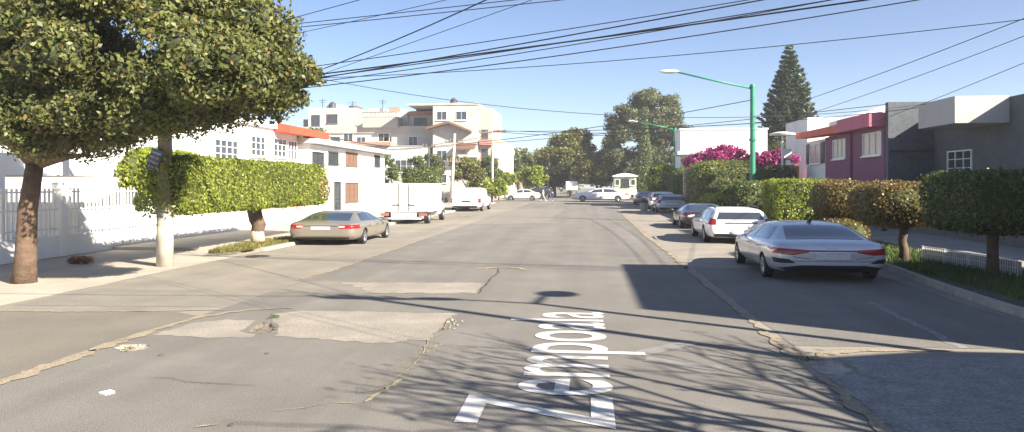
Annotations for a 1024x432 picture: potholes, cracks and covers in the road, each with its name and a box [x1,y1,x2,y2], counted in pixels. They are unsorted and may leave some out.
pothole [250,322,277,333]
